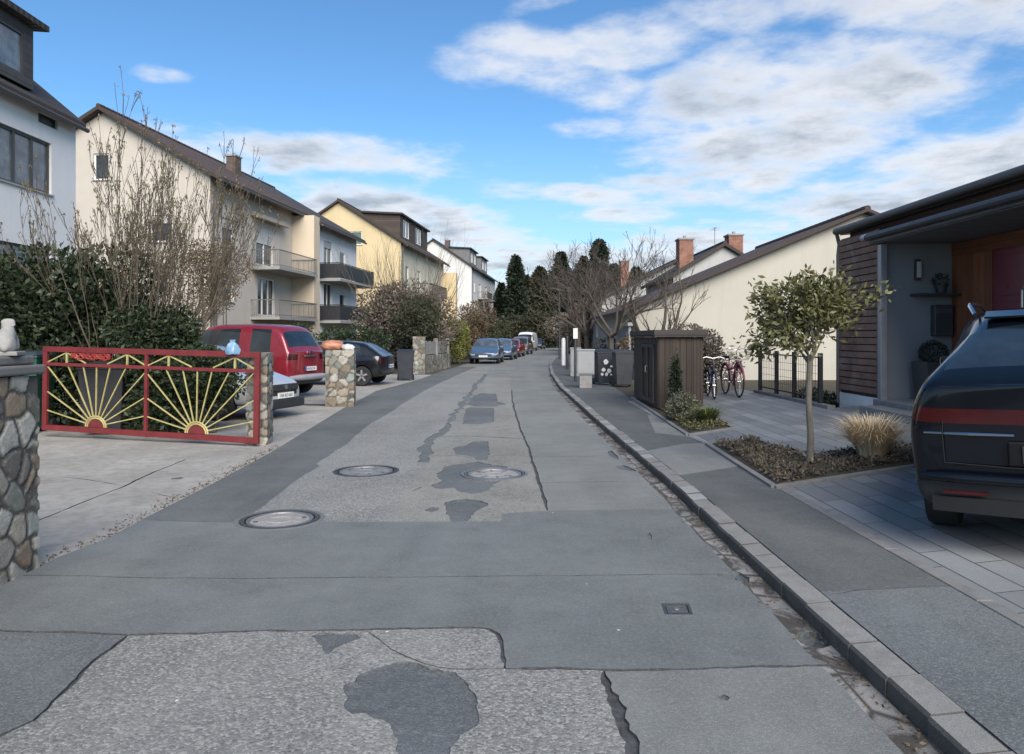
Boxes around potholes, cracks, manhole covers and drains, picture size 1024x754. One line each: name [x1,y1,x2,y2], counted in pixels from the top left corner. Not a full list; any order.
manhole cover [333,465,399,477]
manhole cover [233,509,325,531]
crack [0,626,841,754]
utility cover [661,603,693,614]
crack [406,374,612,510]
manhole cover [461,468,528,481]
